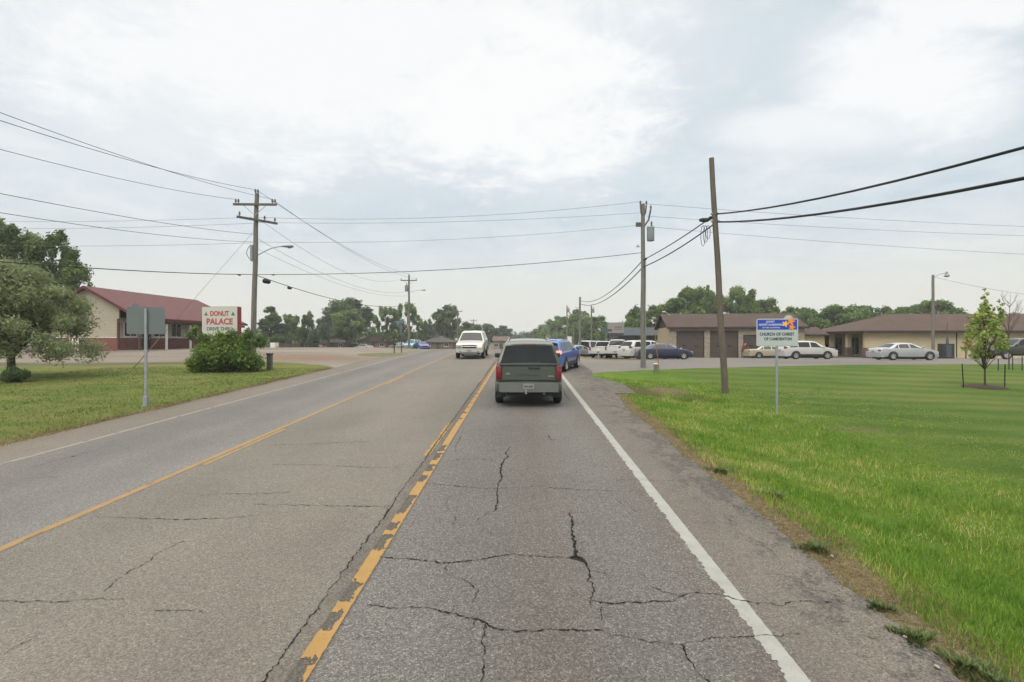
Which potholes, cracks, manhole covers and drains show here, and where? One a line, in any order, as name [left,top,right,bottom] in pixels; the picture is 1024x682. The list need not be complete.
crack [426,447,630,526]
crack [2,541,182,602]
crack [367,508,844,682]
crack [97,492,390,520]
